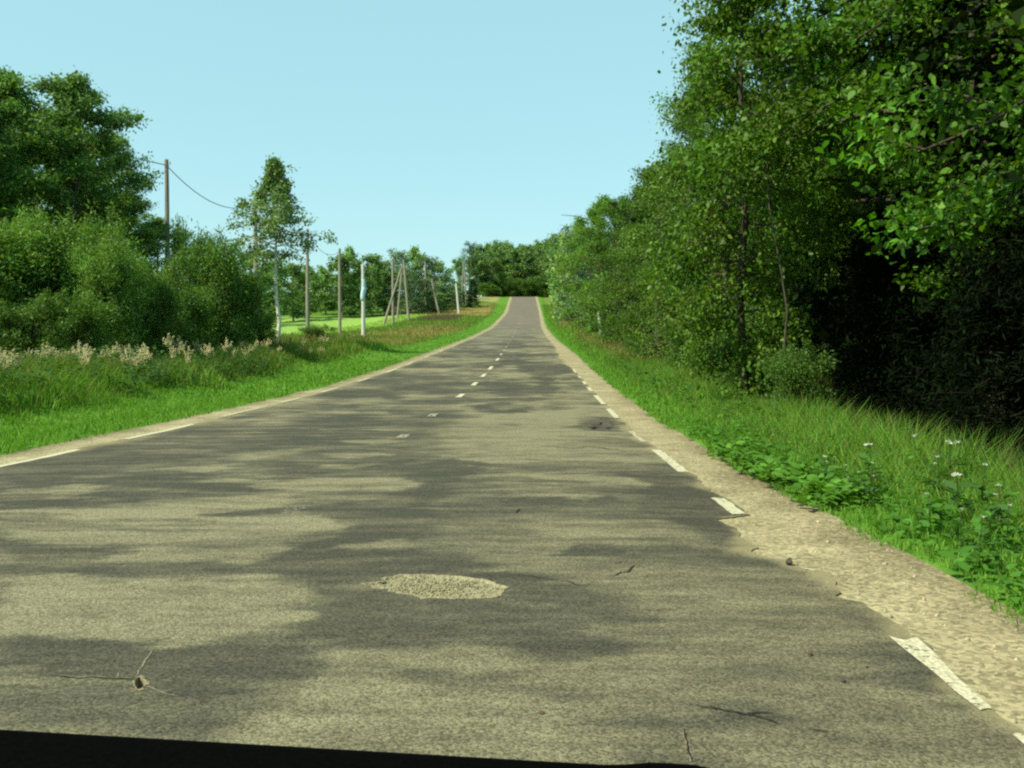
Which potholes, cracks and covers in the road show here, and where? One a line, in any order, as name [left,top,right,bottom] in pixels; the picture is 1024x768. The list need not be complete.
pothole [587,422,614,431]
crack [696,704,822,730]
crack [682,728,693,762]
pothole [133,676,150,691]
crack [52,648,177,696]
